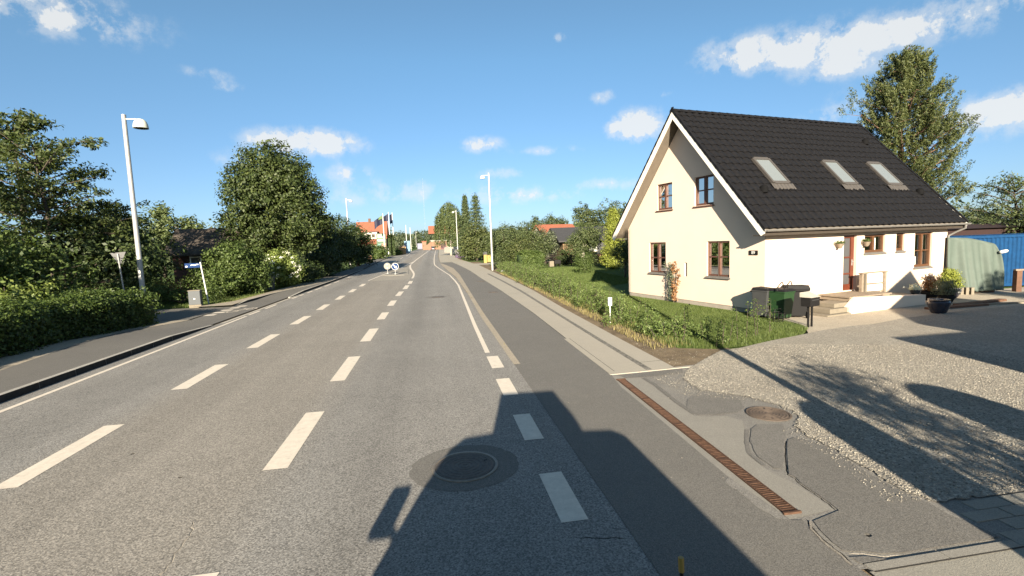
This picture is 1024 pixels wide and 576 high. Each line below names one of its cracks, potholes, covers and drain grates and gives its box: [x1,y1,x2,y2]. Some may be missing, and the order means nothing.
drain grate [616,378,802,515]
manhole cover [432,451,498,482]
crack [158,522,194,576]
manhole cover [746,406,792,421]
